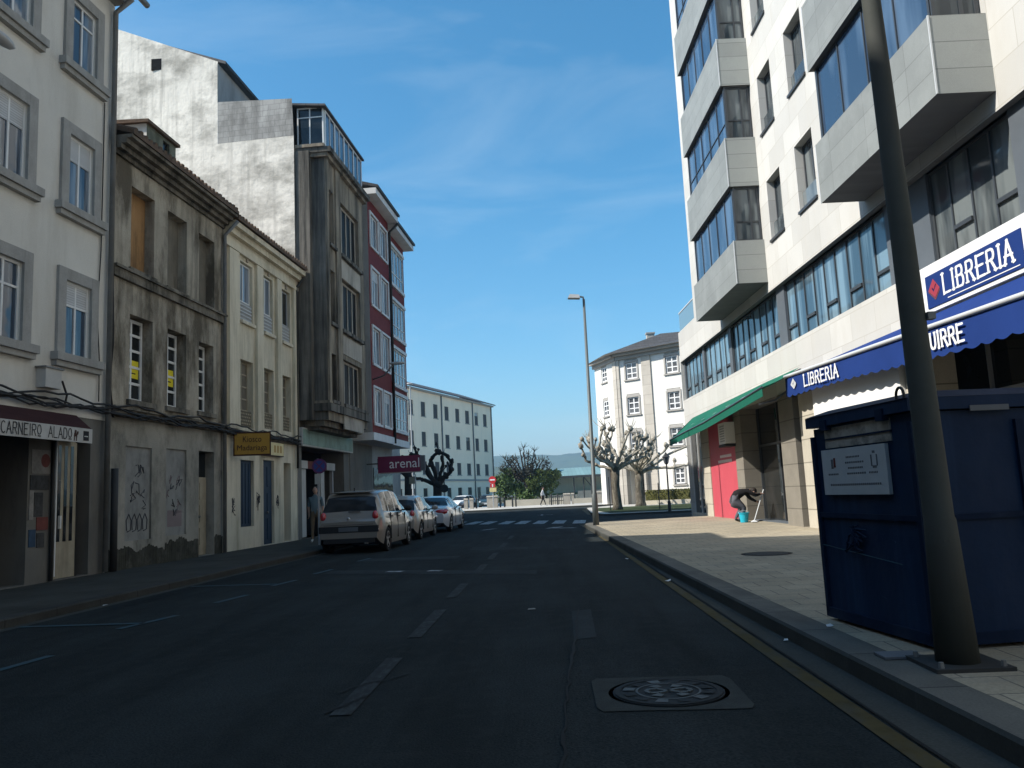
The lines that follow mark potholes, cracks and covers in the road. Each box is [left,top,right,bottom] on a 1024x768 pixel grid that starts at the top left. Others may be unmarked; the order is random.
manhole cover [592,675,754,712]
